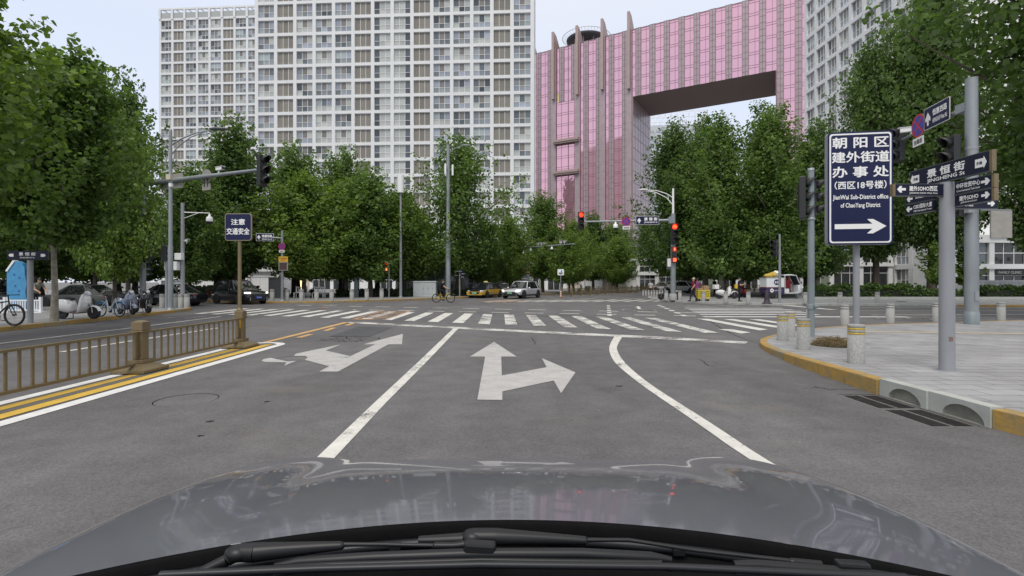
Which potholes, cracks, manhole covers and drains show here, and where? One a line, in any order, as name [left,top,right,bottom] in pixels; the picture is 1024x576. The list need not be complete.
manhole cover [152,393,219,407]
drain grate [838,394,979,427]
